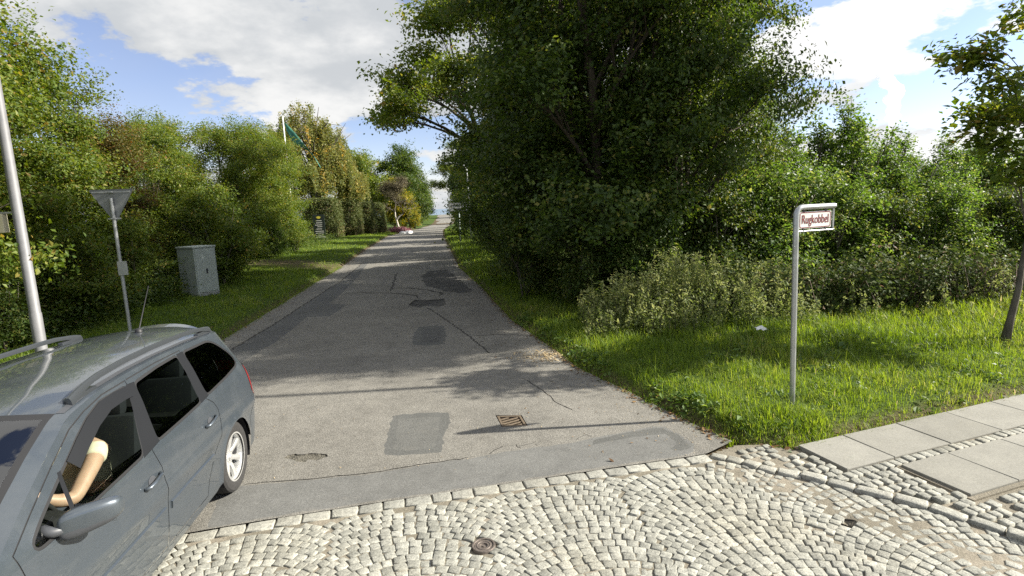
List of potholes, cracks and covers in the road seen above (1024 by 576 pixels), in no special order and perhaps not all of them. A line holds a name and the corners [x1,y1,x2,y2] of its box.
drain grate [497,415,527,427]
pothole [284,453,328,462]
manhole cover [472,538,496,555]
crack [344,273,515,354]
